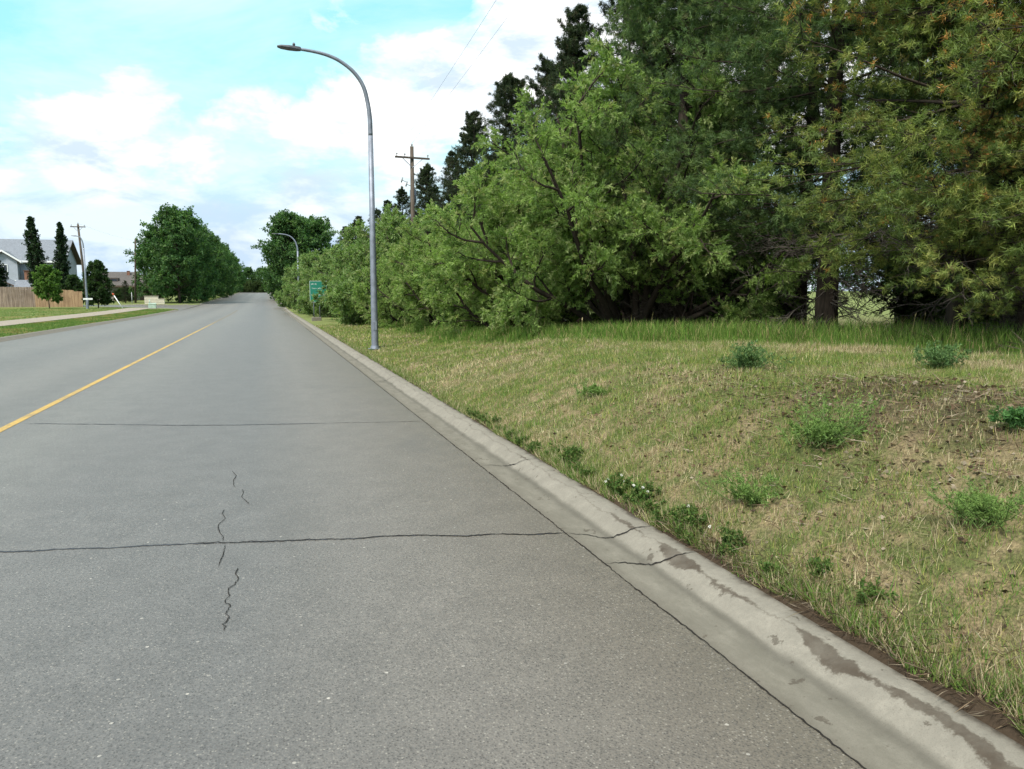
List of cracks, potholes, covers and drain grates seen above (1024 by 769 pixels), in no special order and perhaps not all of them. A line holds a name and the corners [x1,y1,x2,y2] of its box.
crack [0,471,559,629]
